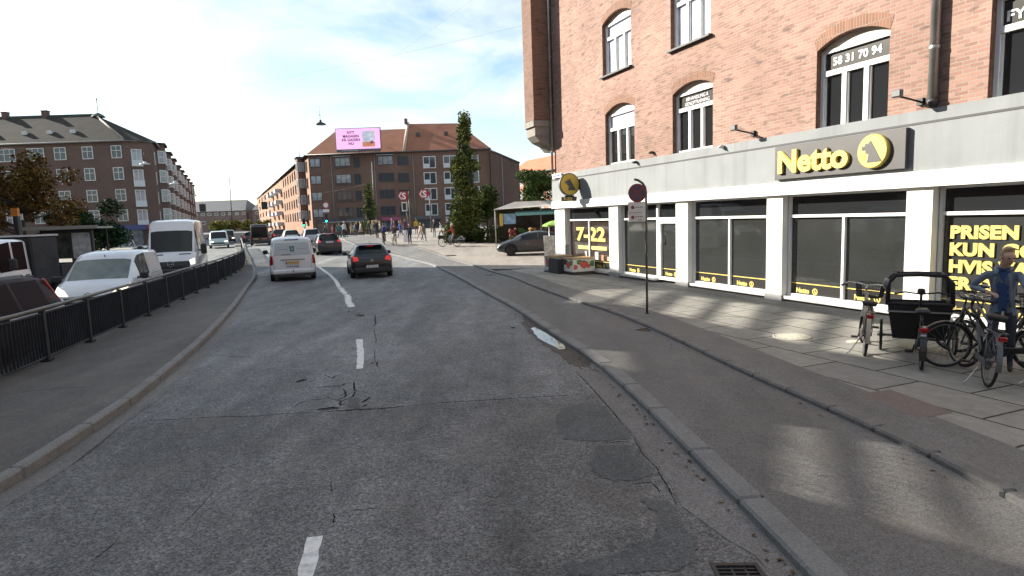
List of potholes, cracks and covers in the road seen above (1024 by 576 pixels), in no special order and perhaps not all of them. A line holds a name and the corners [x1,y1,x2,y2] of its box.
drain grate [710,562,766,576]
manhole cover [773,333,812,341]
crack [144,374,677,505]
